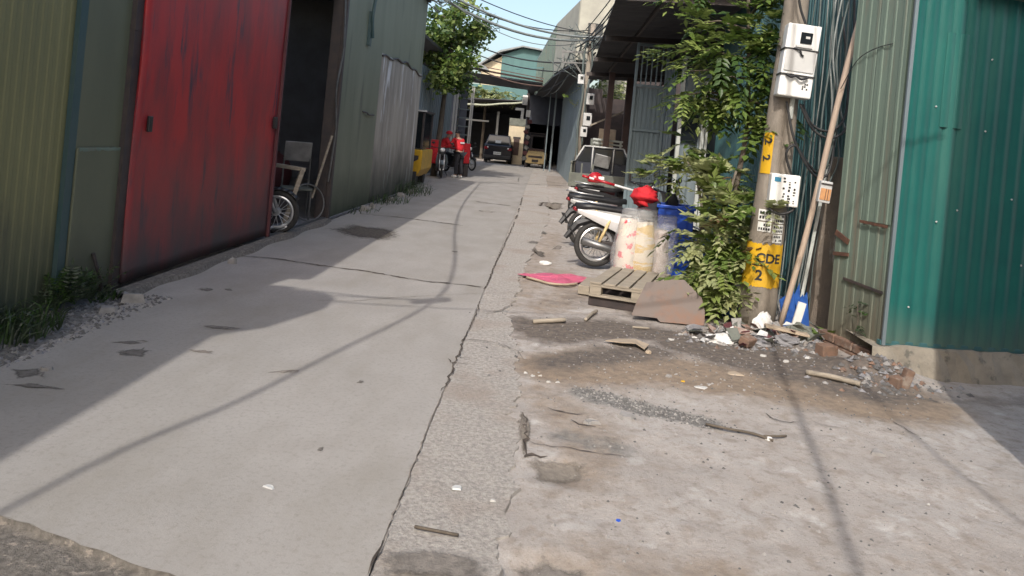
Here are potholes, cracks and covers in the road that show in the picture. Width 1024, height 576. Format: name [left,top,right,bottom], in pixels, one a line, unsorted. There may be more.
crack [476,180,559,219]
crack [441,337,523,390]
crack [522,412,622,458]
crack [249,256,525,312]
